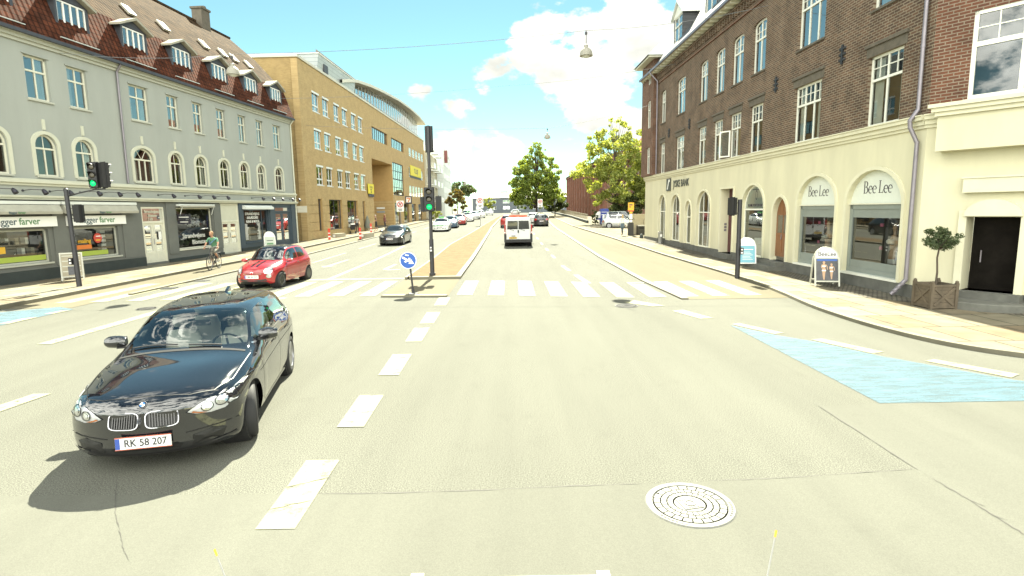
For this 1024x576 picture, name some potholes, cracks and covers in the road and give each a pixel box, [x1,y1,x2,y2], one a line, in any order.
crack [115,484,129,560]
manhole cover [645,483,737,529]
